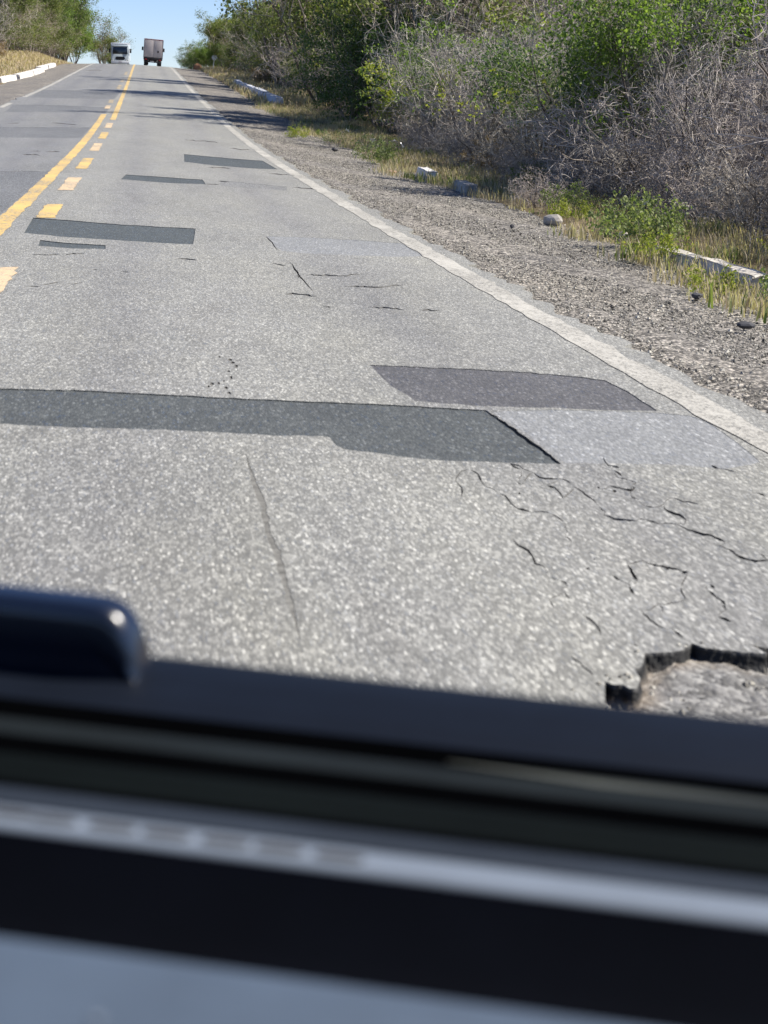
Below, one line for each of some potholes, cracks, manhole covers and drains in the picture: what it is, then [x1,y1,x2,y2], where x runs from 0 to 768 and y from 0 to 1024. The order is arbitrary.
crack [514,541,569,607]
crack [456,458,768,563]
pothole [605,643,768,722]
crack [706,585,733,622]
crack [612,561,688,647]
crack [273,263,398,307]
